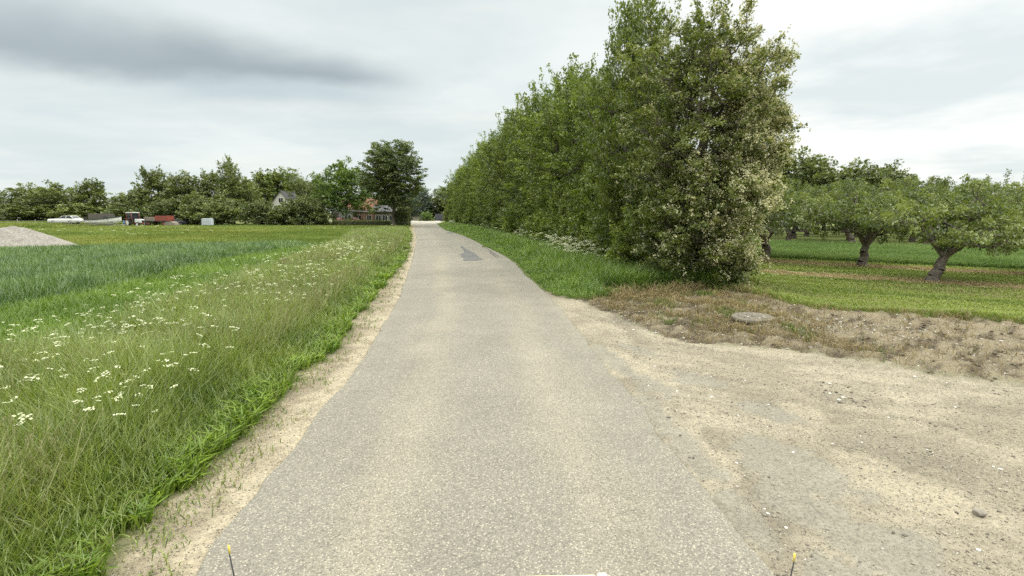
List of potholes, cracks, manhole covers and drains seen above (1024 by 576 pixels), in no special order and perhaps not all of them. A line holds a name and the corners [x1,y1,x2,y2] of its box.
manhole cover [731,312,775,325]
